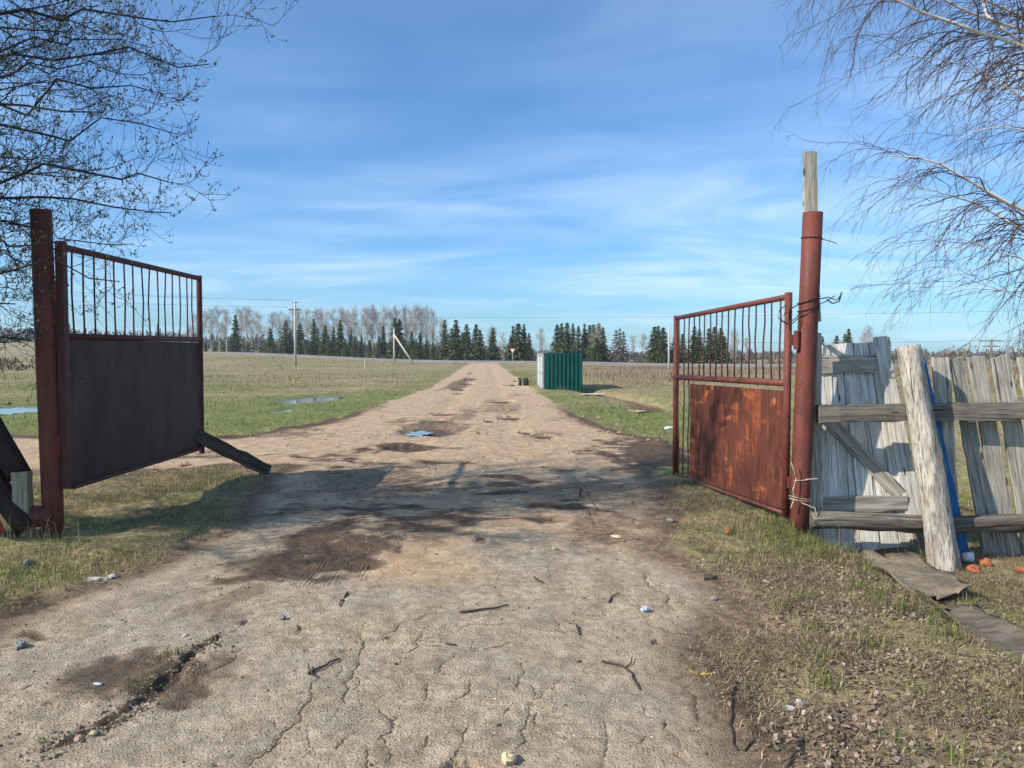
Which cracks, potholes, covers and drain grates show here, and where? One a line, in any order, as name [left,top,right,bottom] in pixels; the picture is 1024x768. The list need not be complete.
crack [643,682,699,765]
crack [247,678,318,767]
pothole [380,445,436,453]
crack [456,615,574,750]
crack [555,721,608,767]
pothole [390,425,474,438]
crack [382,616,456,702]
crack [330,623,399,768]
